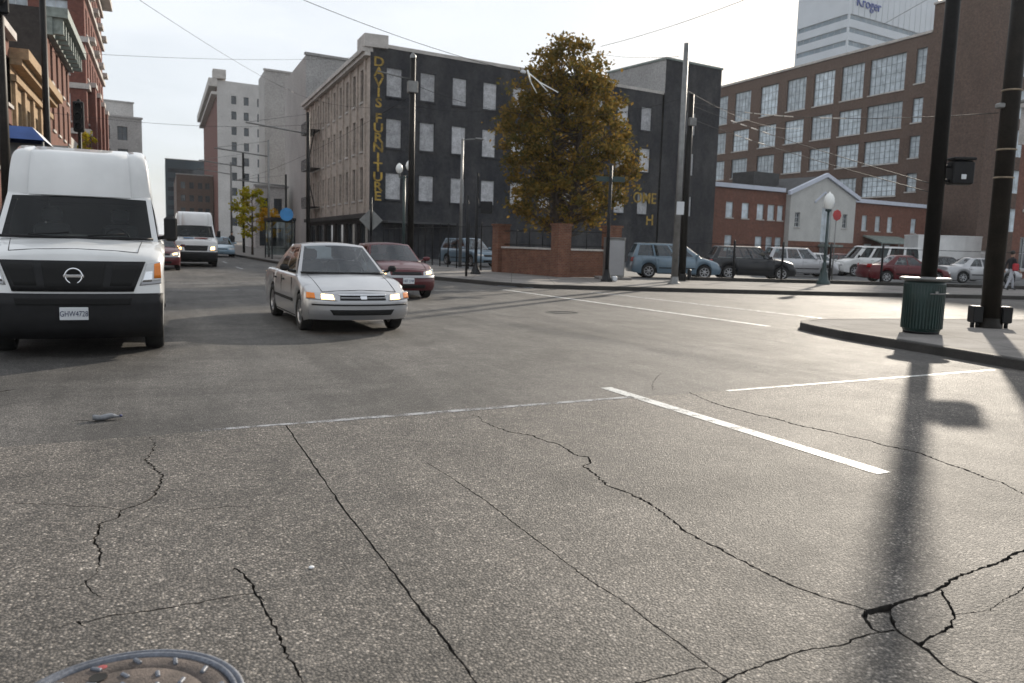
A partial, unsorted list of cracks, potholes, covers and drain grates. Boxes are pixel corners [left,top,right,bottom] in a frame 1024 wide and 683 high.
manhole cover [35,649,244,683]
crack [39,568,303,683]
crack [431,415,1024,683]
crack [689,392,1023,494]
crack [18,437,164,597]
